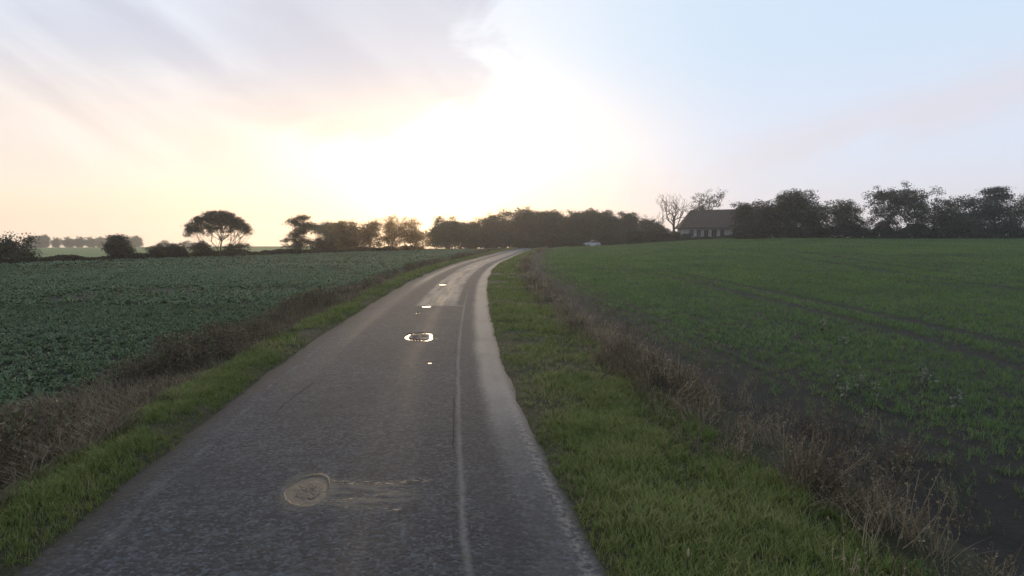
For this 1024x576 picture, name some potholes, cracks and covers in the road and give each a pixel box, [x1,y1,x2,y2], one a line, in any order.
pothole [404,332,443,341]
